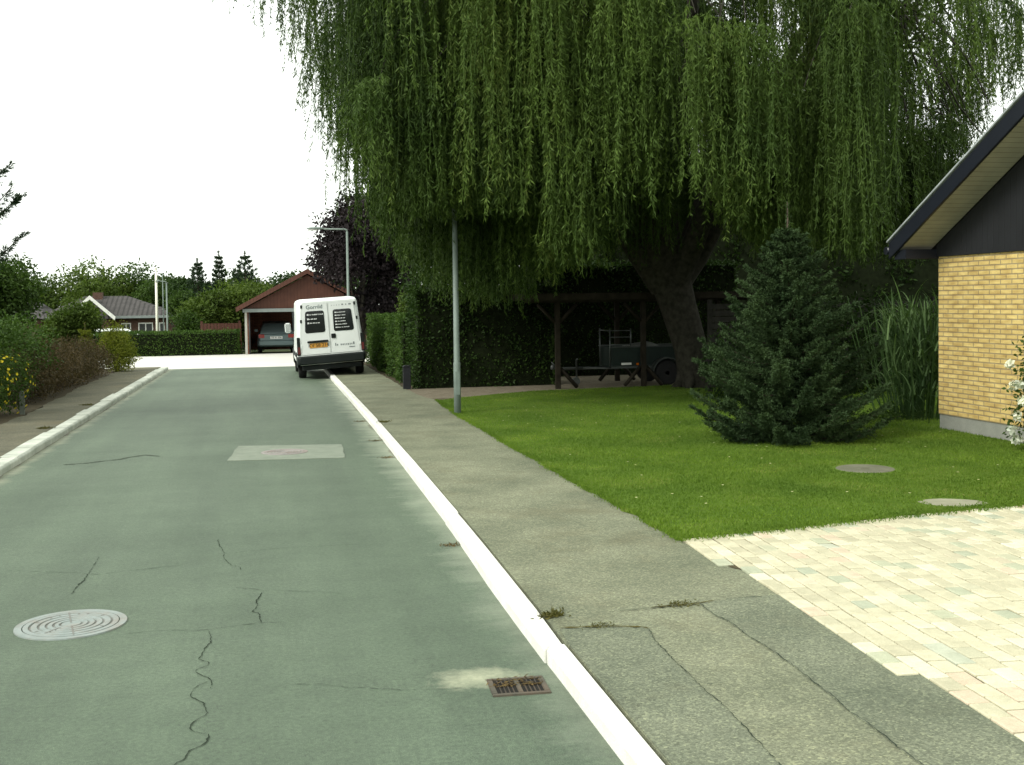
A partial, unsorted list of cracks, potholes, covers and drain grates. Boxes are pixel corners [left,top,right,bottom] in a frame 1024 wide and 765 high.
manhole cover [13,609,127,641]
drain grate [486,673,551,697]
crack [128,587,333,765]
